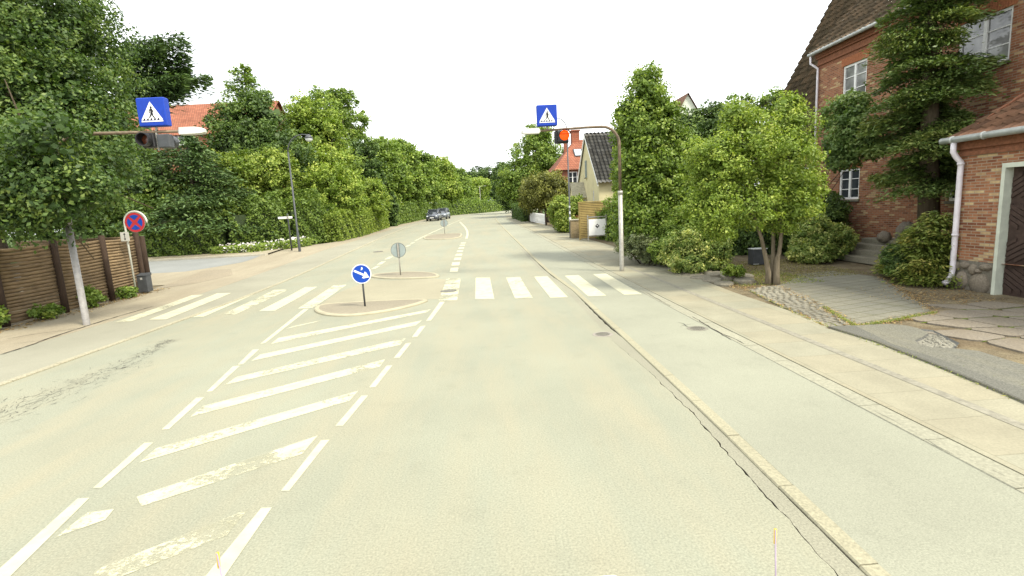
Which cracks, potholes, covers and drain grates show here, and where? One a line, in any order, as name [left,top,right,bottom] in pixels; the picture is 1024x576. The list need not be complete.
crack [585,303,838,576]
